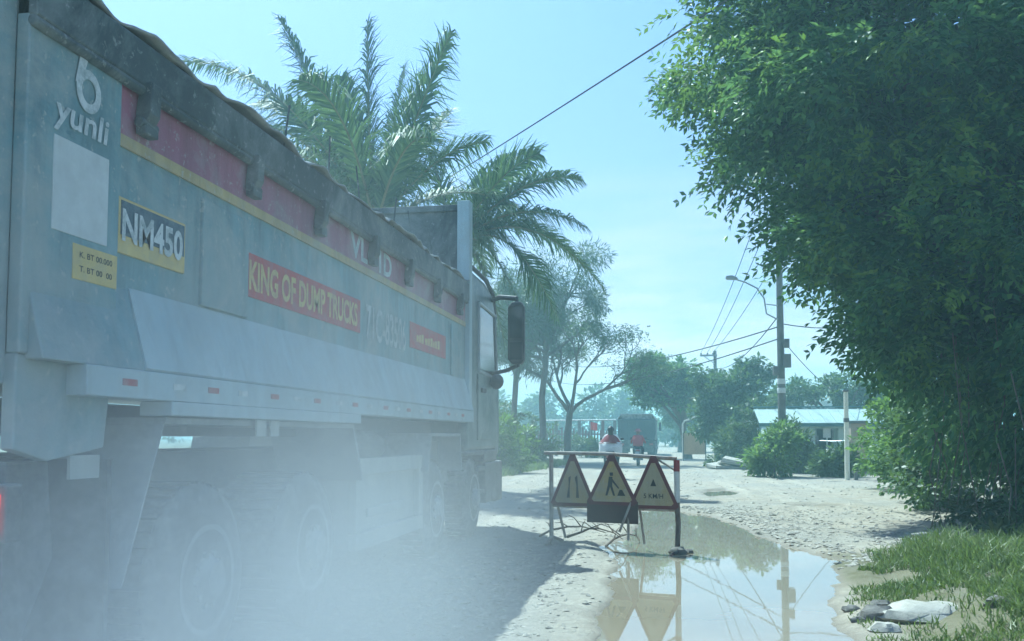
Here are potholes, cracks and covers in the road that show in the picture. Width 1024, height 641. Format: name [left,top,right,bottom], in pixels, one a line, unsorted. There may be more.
pothole [550,507,908,641]
pothole [695,487,751,496]
